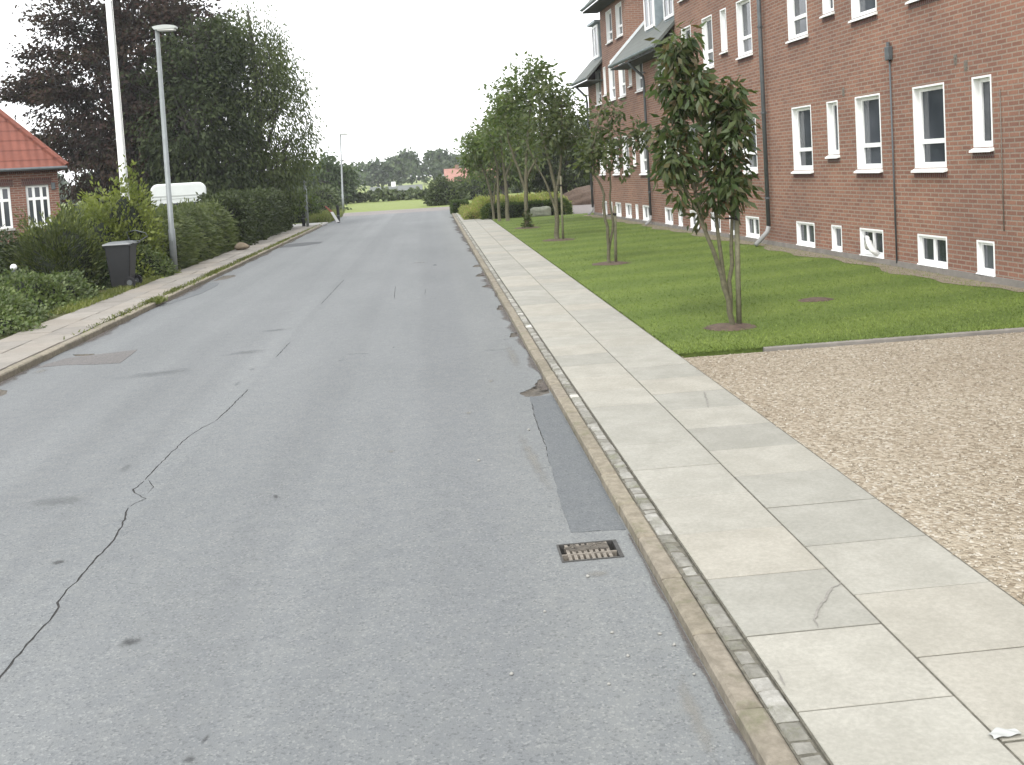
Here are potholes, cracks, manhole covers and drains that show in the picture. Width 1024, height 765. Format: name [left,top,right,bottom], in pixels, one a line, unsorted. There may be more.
pothole [520,379,550,397]
crack [0,391,247,678]
drain grate [556,539,624,563]
crack [813,582,841,628]
